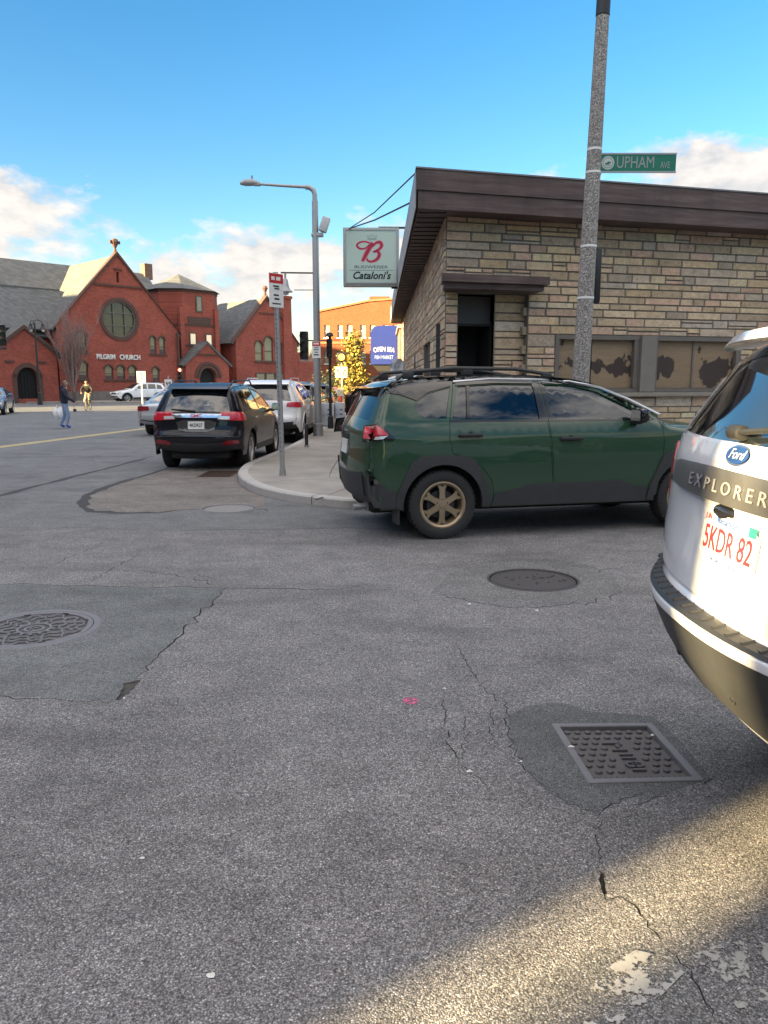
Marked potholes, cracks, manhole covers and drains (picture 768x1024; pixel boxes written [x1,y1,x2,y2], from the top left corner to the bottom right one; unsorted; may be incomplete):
crack [4,549,226,703]
crack [435,593,618,608]
manhole cover [201,504,257,513]
crack [440,643,714,1018]
manhole cover [0,609,102,650]
manhole cover [487,568,580,592]
utility cover [551,723,705,792]
